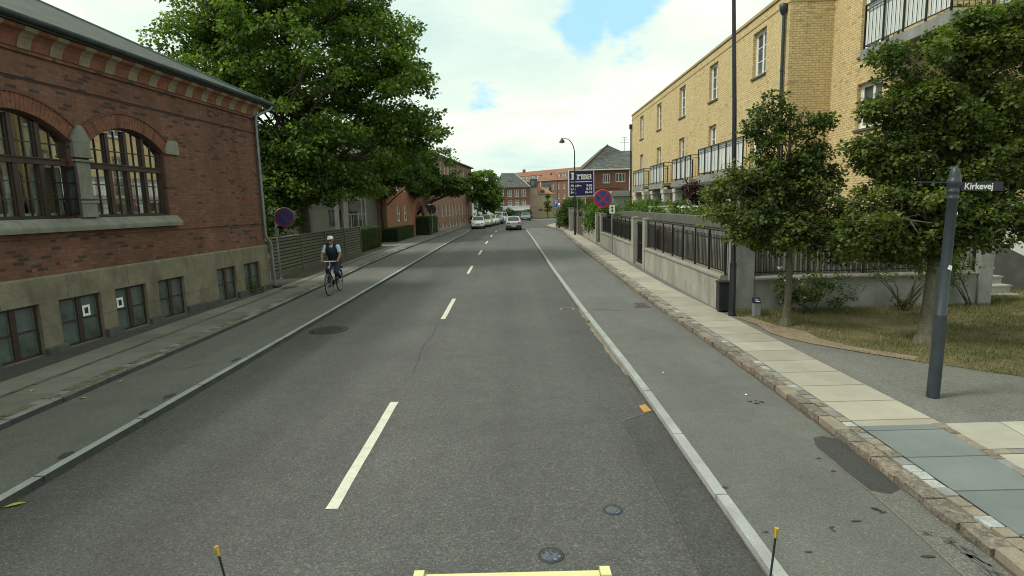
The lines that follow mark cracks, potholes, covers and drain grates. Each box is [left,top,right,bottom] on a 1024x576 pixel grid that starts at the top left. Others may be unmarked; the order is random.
utility cover [538,547,564,563]
utility cover [603,505,623,515]
manhole cover [309,326,348,334]
